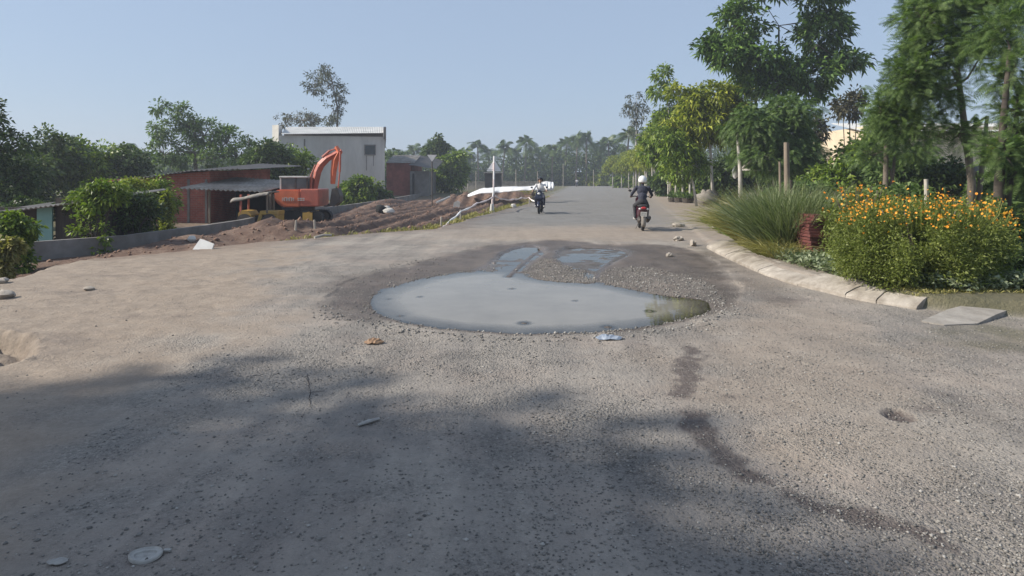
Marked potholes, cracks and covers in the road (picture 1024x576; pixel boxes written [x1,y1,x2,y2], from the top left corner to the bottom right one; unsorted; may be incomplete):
pothole [316,239,746,339]
pothole [876,408,923,423]
pothole [0,328,46,369]
